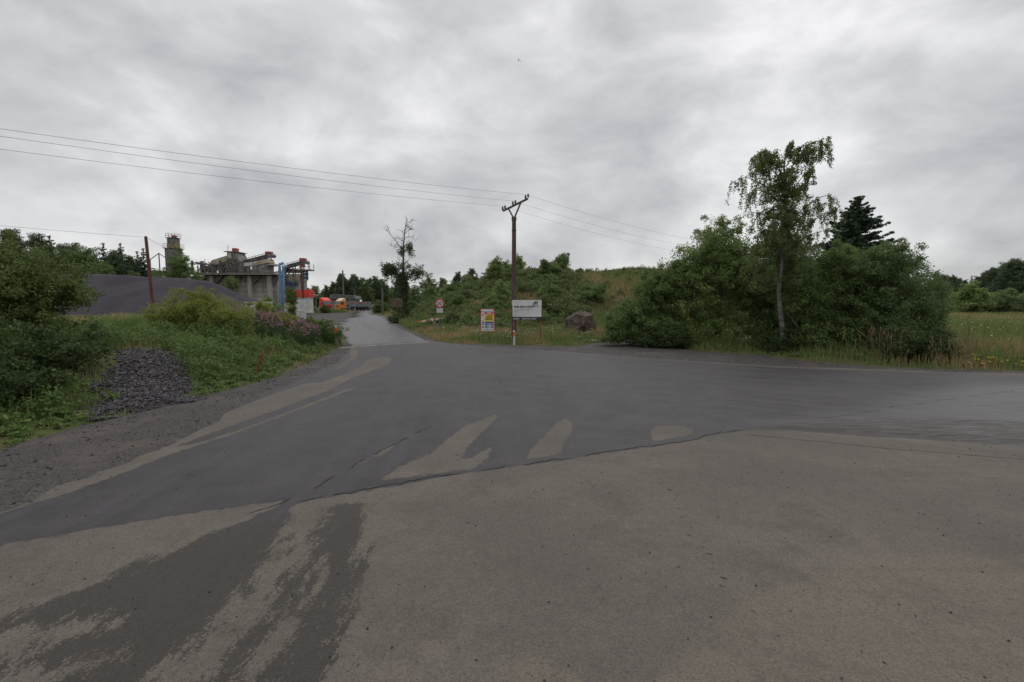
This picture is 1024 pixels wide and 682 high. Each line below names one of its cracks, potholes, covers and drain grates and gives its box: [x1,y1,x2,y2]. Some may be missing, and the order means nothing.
crack [251,429,424,513]
